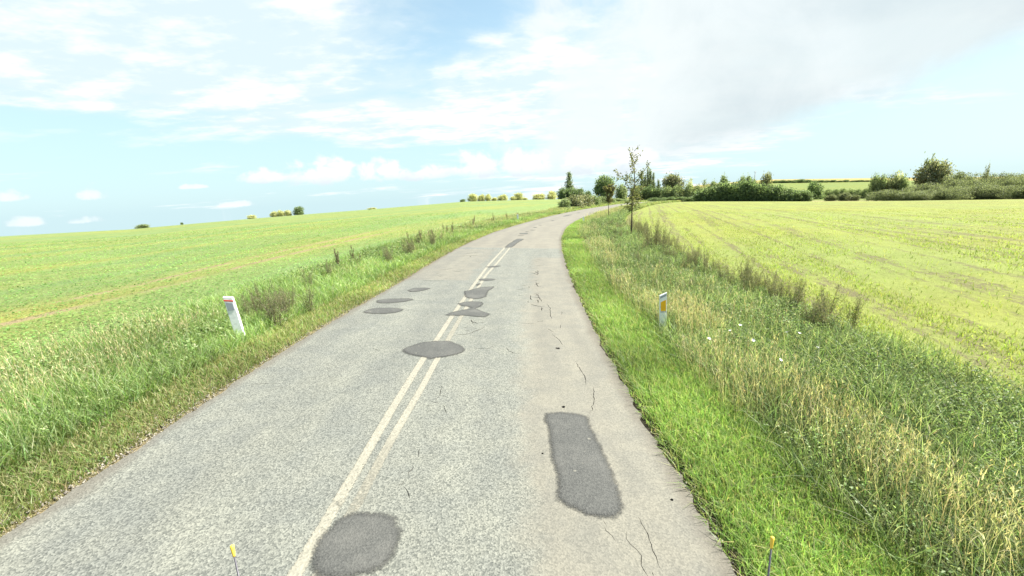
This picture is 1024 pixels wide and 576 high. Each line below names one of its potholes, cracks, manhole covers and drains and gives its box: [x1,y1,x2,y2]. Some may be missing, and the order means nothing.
crack [518,265,561,342]
crack [604,518,658,576]
